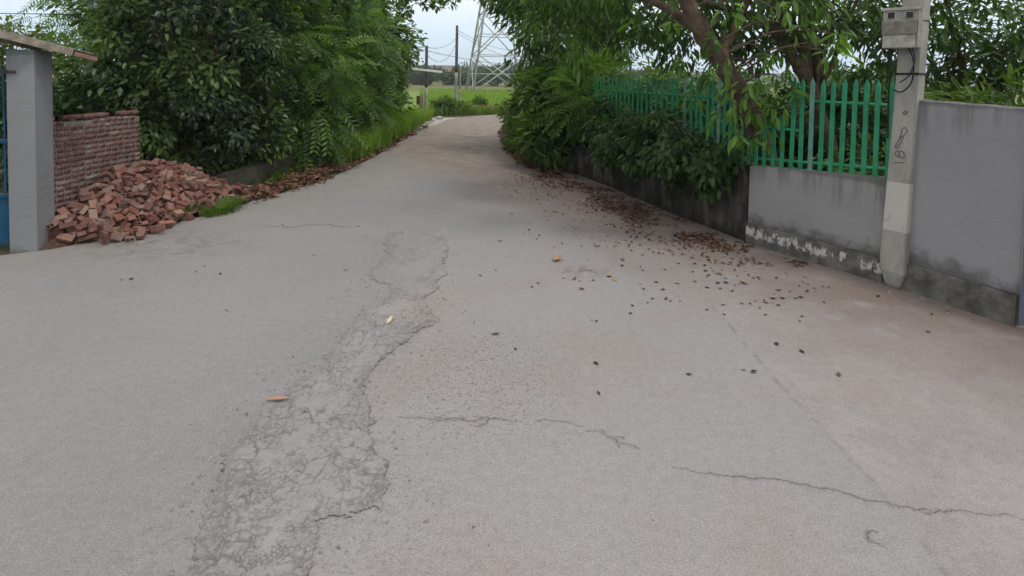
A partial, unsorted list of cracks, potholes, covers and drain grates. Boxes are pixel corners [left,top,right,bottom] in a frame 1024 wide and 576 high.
crack [671,466,1024,550]
crack [179,223,640,576]
